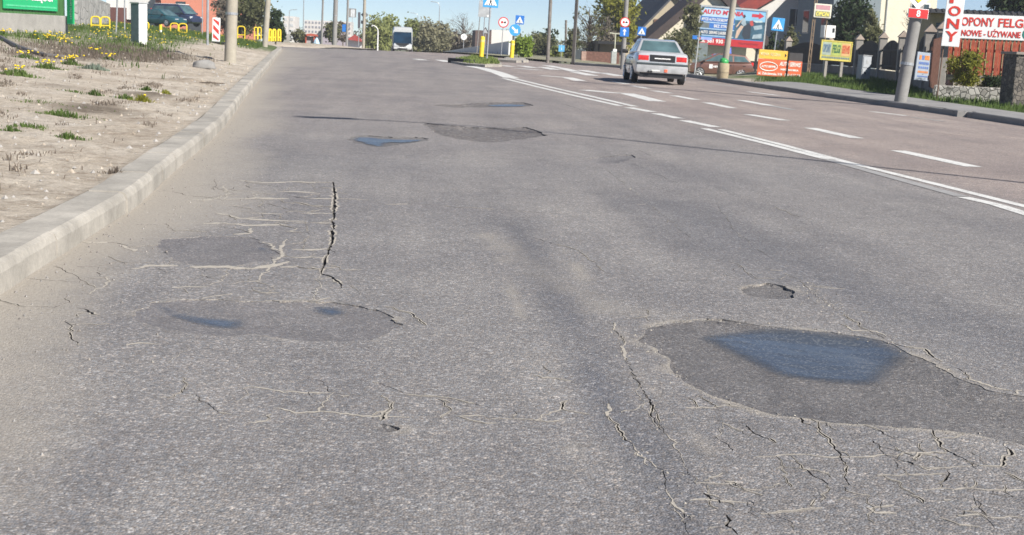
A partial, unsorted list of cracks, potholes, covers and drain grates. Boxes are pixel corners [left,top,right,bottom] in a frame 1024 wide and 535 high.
pothole [132,299,403,342]
pothole [423,123,546,142]
pothole [625,317,1024,445]
pothole [739,283,795,299]
pothole [347,135,427,147]
crack [126,171,1024,535]
crack [0,173,427,345]
pothole [157,235,279,266]
